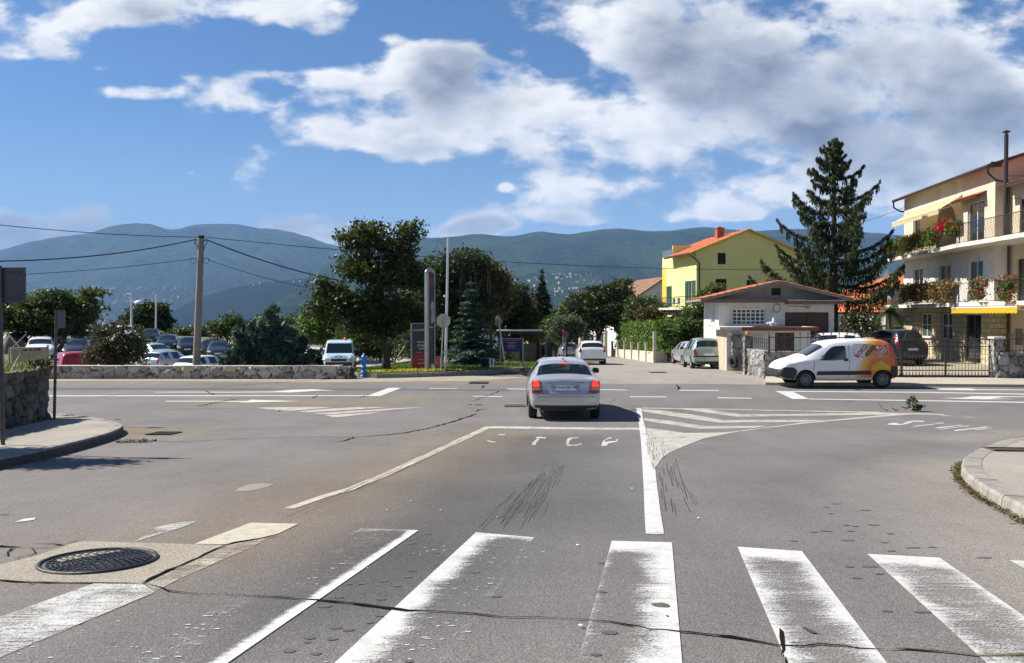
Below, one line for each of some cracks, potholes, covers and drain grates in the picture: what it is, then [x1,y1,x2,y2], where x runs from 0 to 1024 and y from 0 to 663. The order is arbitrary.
manhole cover [36,547,159,575]
crack [189,385,499,446]
